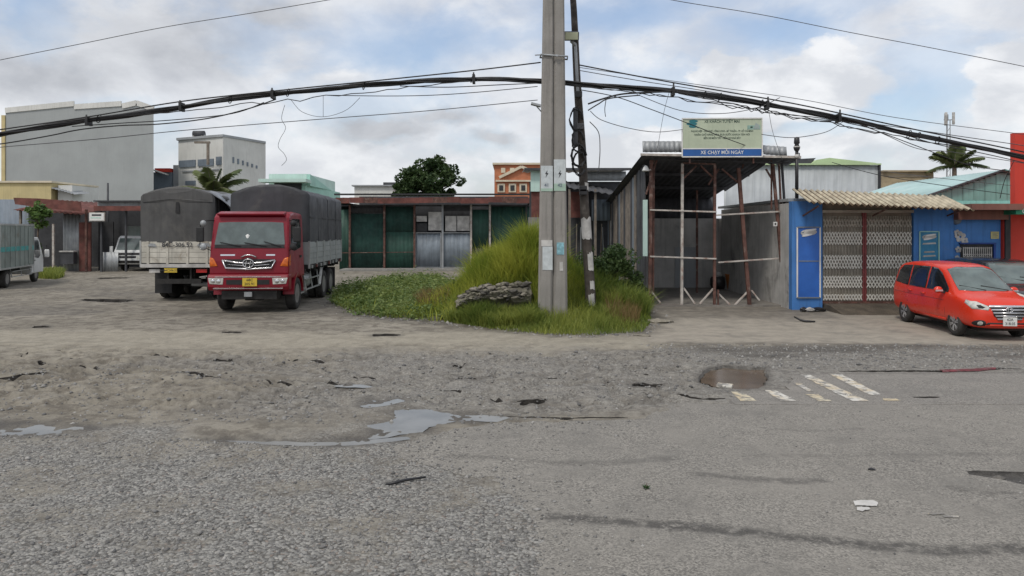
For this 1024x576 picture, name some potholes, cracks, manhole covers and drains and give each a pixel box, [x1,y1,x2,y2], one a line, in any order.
crack [441,390,626,420]
crack [0,350,61,381]
pothole [698,365,769,387]
crack [635,374,725,400]
